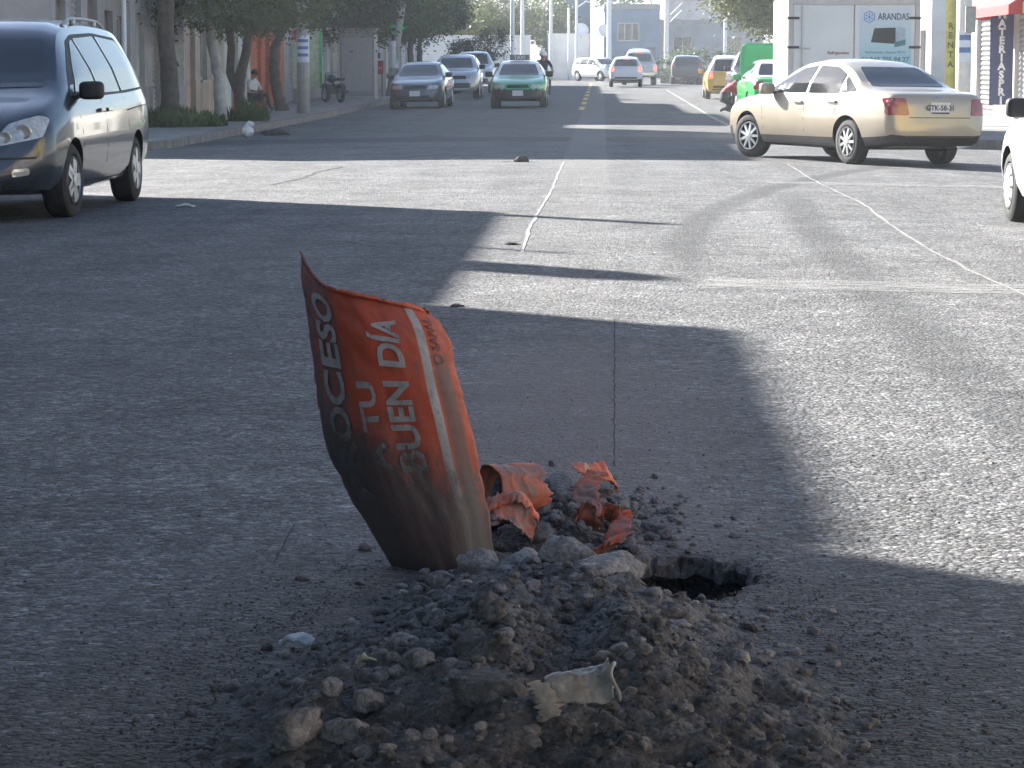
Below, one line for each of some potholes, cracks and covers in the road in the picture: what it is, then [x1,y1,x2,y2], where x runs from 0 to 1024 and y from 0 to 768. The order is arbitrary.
pothole [637,556,762,601]
crack [788,164,1024,295]
crack [271,167,341,185]
